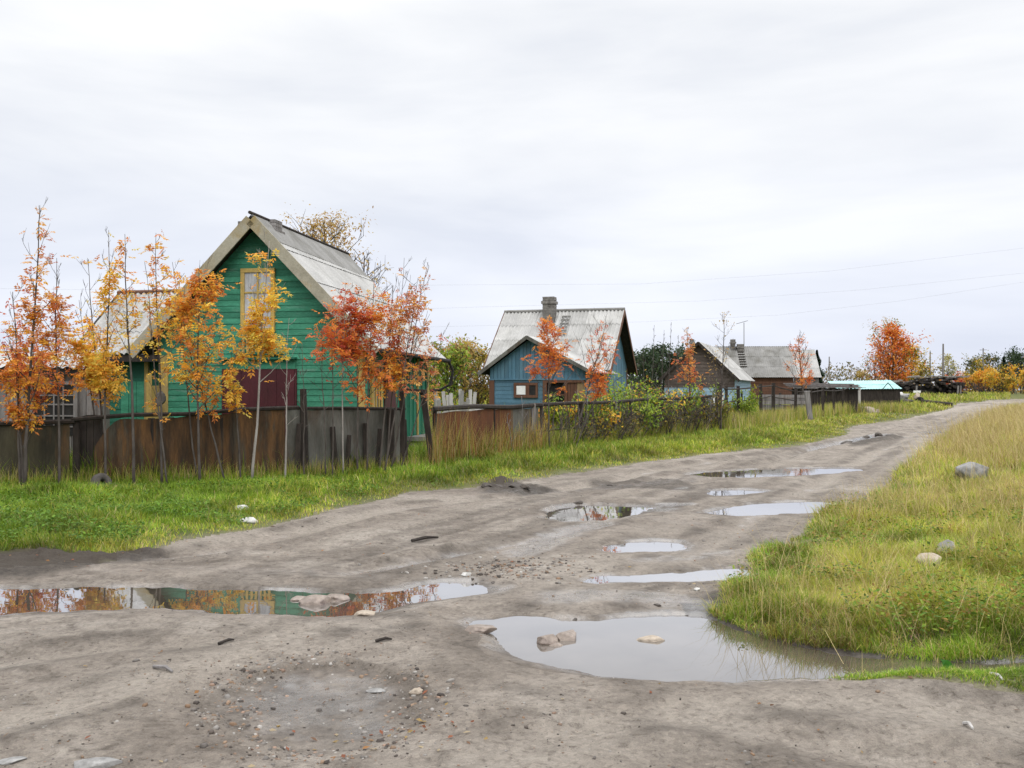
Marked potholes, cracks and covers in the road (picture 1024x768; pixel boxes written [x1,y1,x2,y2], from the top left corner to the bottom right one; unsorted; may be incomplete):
pothole [537,502,700,522]
pothole [463,609,1024,685]
pothole [701,488,768,496]
pothole [576,565,756,585]
pothole [691,499,853,516]
pothole [0,576,518,618]
pothole [595,537,696,554]
pothole [683,466,866,478]
